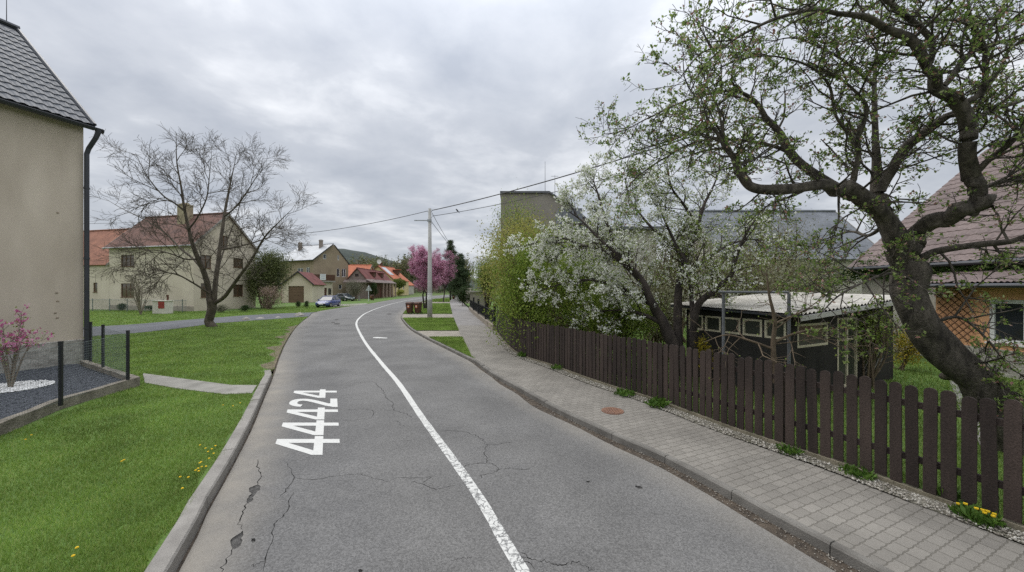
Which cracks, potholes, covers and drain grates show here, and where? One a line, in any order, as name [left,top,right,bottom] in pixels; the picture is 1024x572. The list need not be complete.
crack [220,464,262,571]
manhole cover [601,407,624,415]
crack [251,463,454,570]
crack [520,552,594,571]
crack [462,431,527,478]
pothole [230,531,243,549]
pothole [247,485,260,503]
